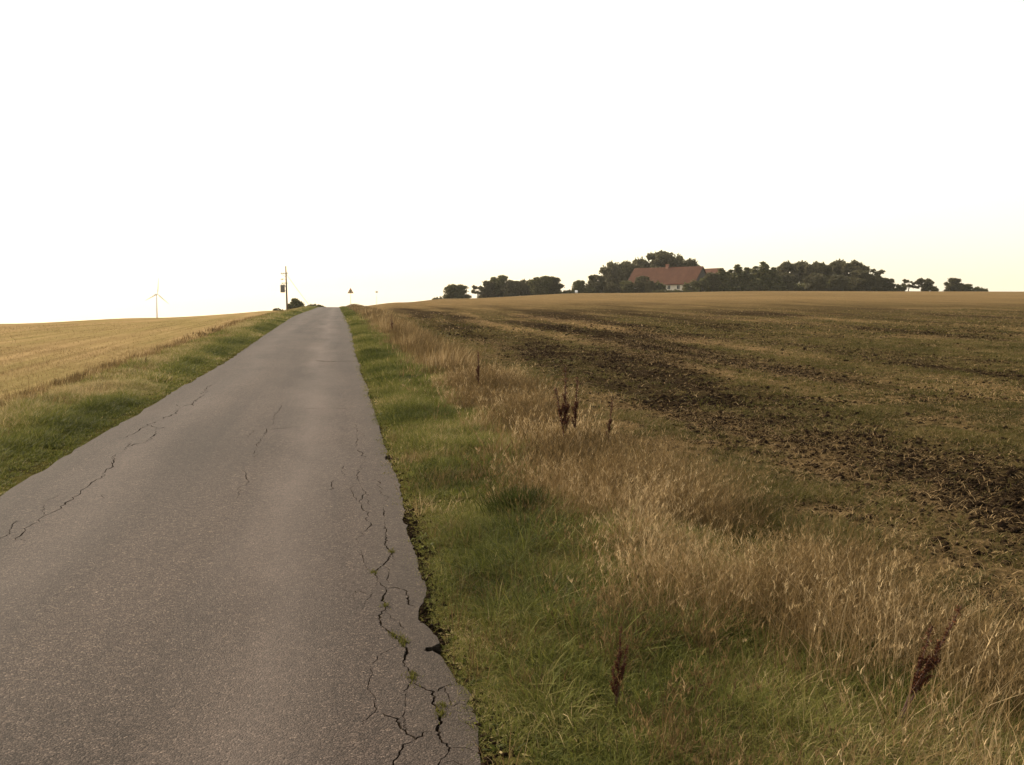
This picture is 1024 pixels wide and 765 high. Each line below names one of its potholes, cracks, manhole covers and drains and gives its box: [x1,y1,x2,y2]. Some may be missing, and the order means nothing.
crack [330,408,473,765]
crack [6,388,208,541]
